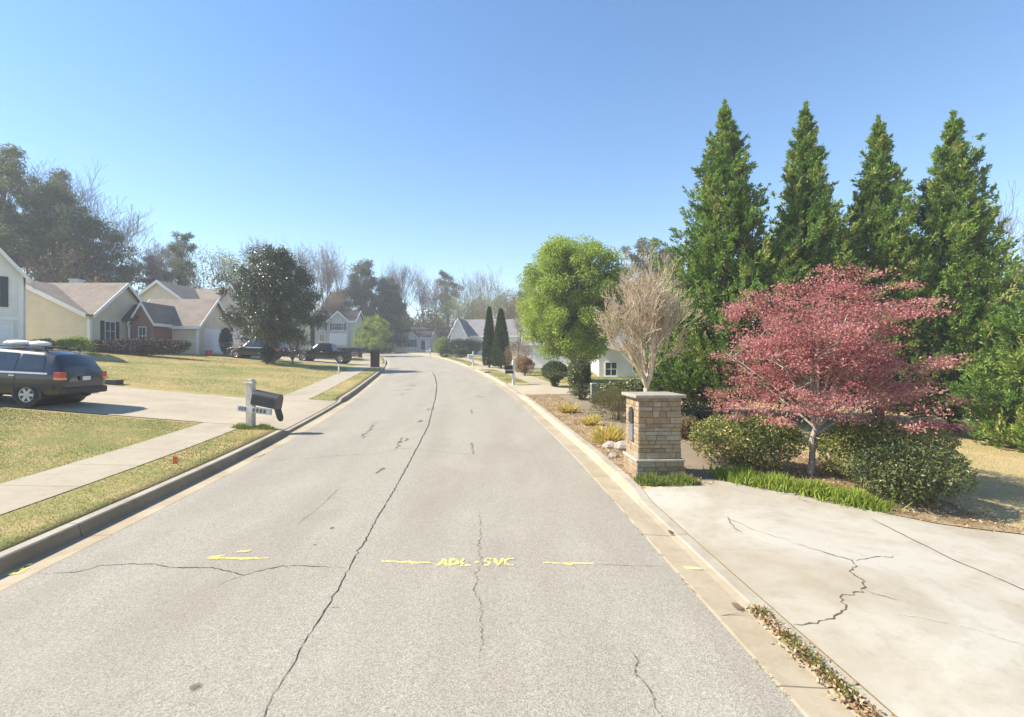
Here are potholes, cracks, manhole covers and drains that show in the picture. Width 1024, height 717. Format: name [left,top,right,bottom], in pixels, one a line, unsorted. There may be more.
crack [473,513,484,658]
crack [790,541,894,625]
crack [44,372,474,717]
